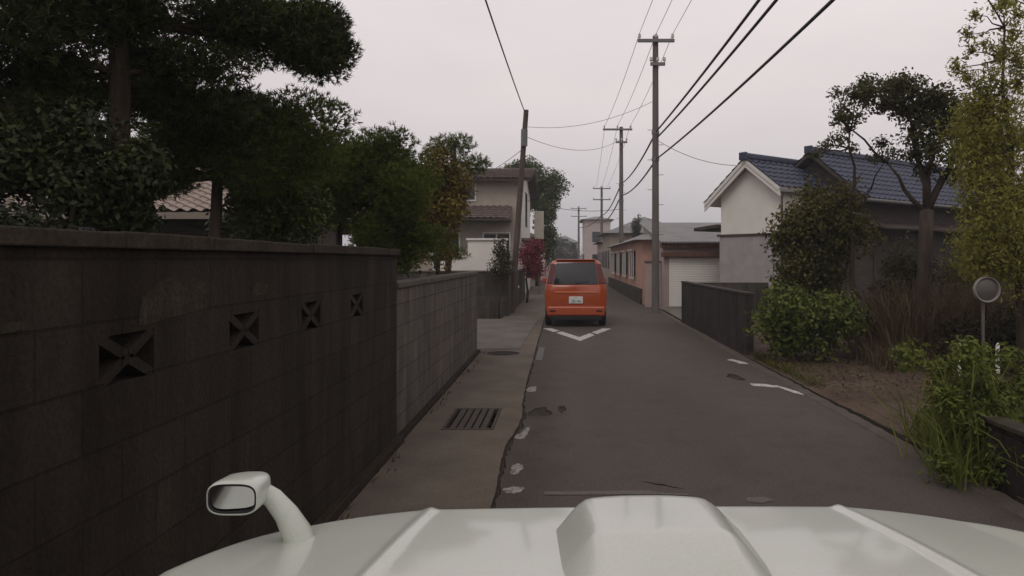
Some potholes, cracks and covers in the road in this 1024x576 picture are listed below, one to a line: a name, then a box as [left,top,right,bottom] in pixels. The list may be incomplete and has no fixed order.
crack [490,318,545,509]
drain grate [441,408,502,430]
pothole [527,407,553,416]
